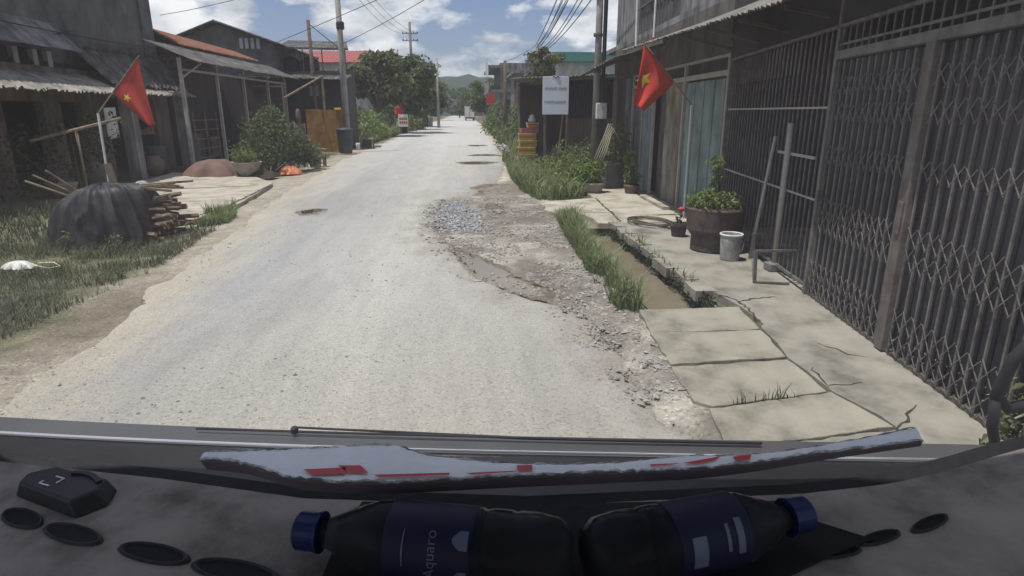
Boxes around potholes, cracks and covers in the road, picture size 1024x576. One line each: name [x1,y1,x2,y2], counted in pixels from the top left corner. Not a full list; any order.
crack [719,294,774,325]
pothole [418,197,504,237]
pothole [295,208,328,216]
pothole [481,202,511,217]
crack [895,405,916,429]
pothole [452,247,560,305]
crack [811,367,861,386]
